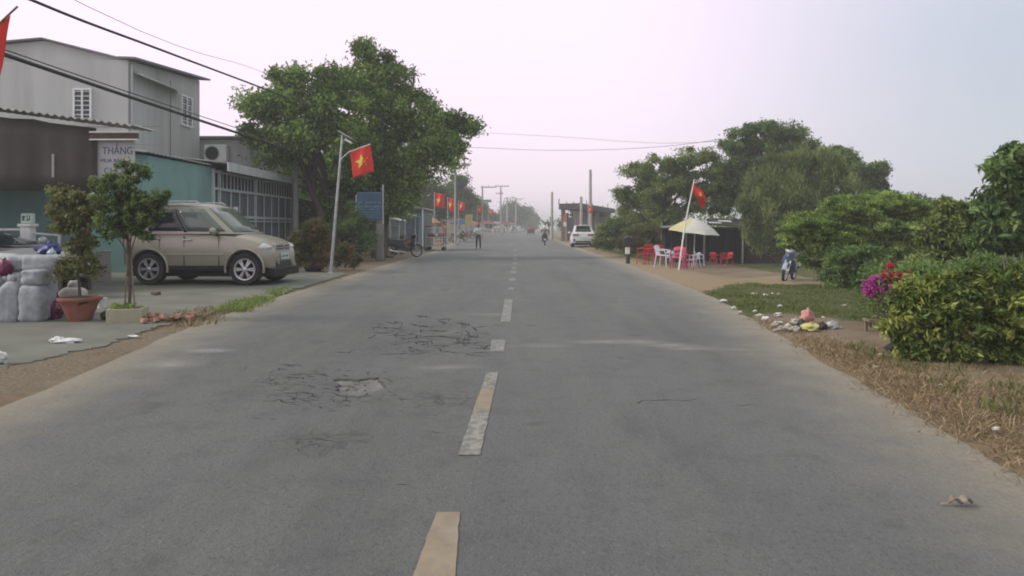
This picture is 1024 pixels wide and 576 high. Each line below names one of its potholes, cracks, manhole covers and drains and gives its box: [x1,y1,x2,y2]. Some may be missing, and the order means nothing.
crack [267,365,406,412]
crack [342,315,491,357]
pothole [333,377,386,396]
